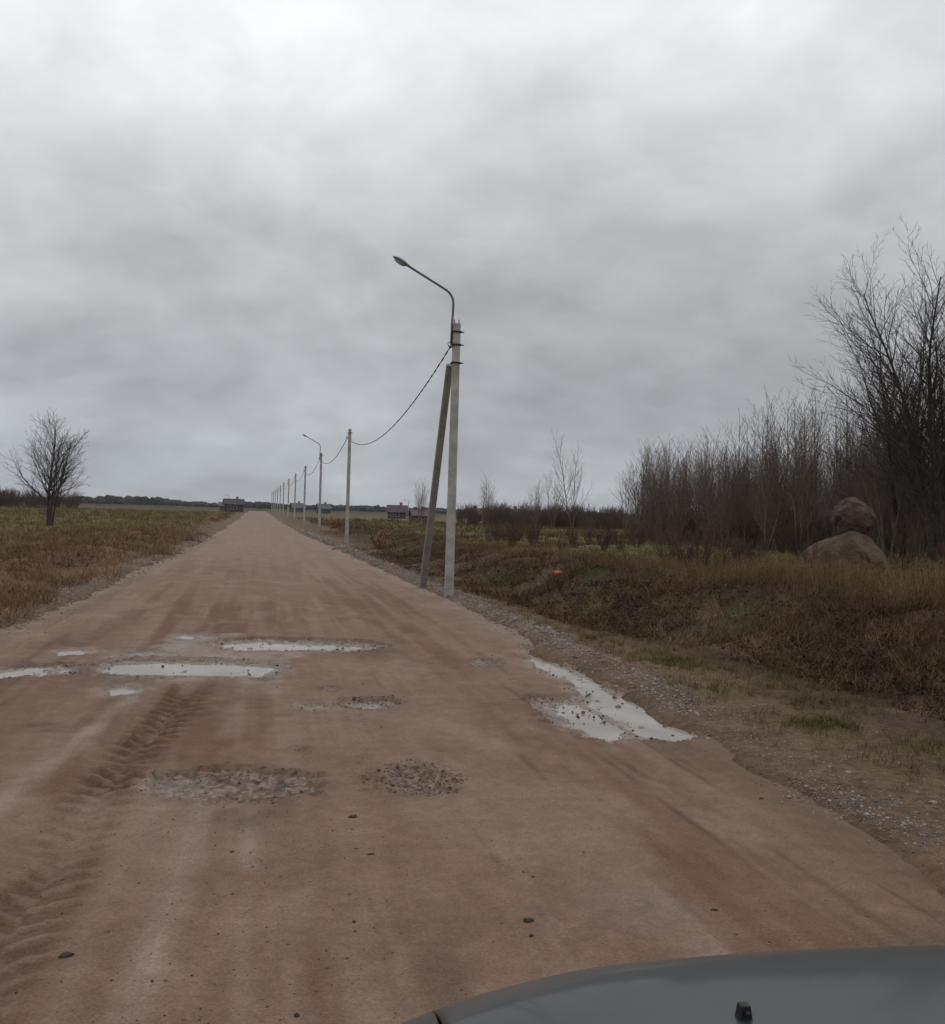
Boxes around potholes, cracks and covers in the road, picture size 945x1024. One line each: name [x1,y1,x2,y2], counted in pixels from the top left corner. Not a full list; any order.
pothole [523,645,703,743]
pothole [344,698,397,709]
pothole [206,637,387,654]
pothole [93,657,285,681]
pothole [151,764,322,803]
pothole [0,664,83,680]
pothole [361,766,459,796]
